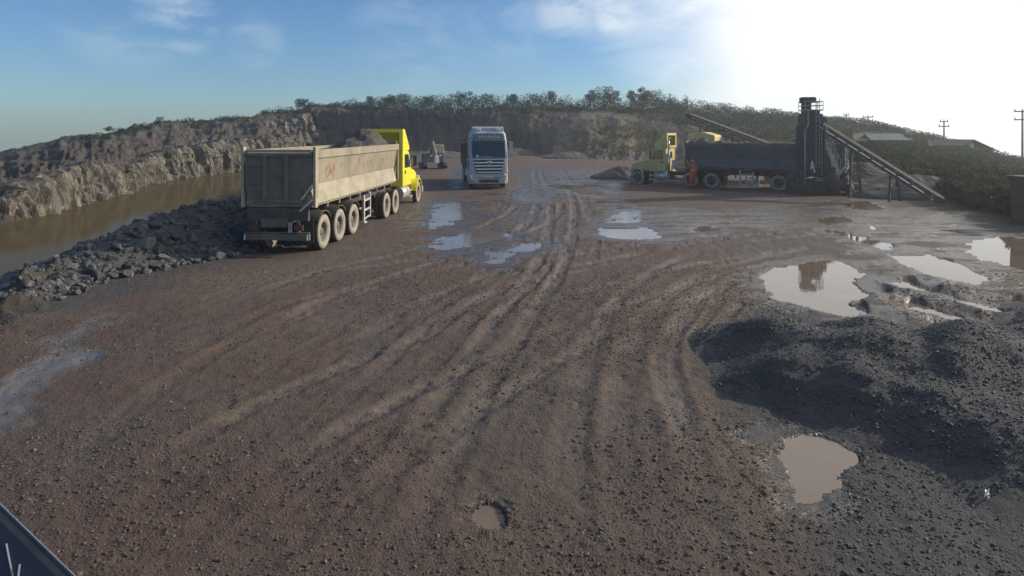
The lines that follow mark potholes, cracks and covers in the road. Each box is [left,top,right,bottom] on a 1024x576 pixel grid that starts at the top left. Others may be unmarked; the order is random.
pothole [453,493,513,547]
